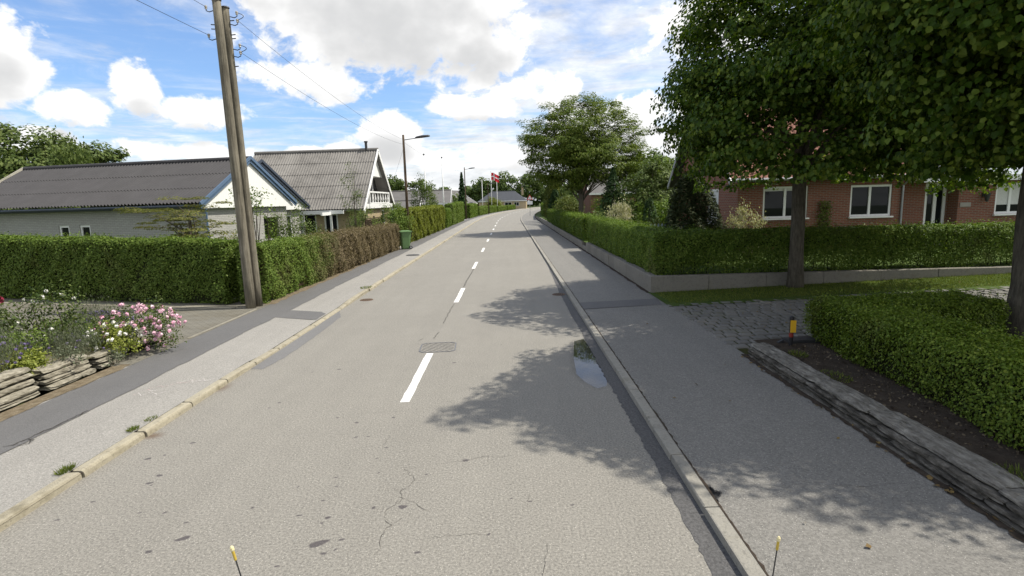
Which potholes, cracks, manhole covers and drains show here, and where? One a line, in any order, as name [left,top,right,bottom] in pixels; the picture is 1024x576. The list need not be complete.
manhole cover [419,342,457,353]
